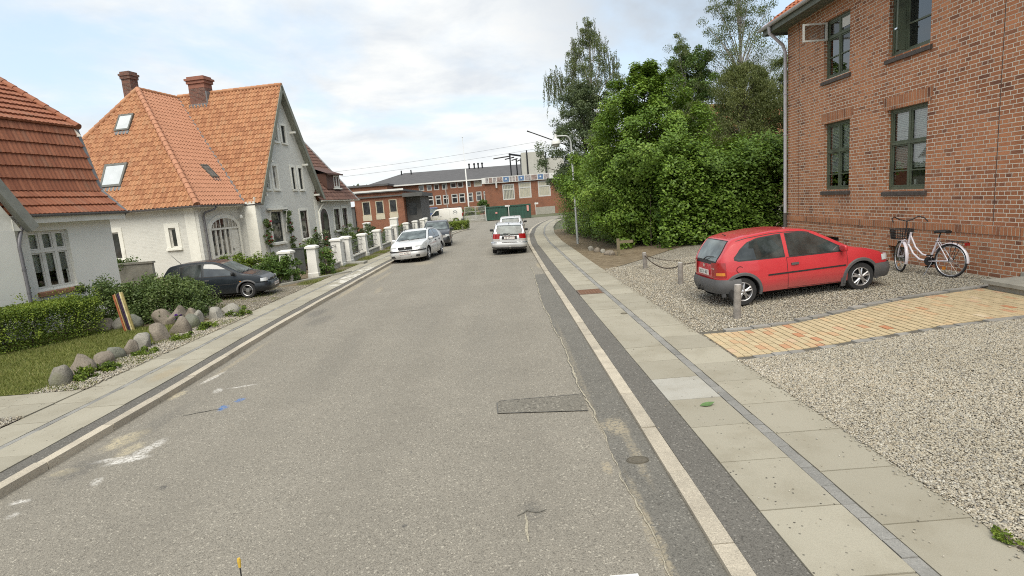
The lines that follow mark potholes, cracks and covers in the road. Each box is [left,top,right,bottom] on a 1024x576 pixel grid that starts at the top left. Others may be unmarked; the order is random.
crack [517,509,546,542]
crack [529,265,670,576]
manhole cover [626,456,649,464]
